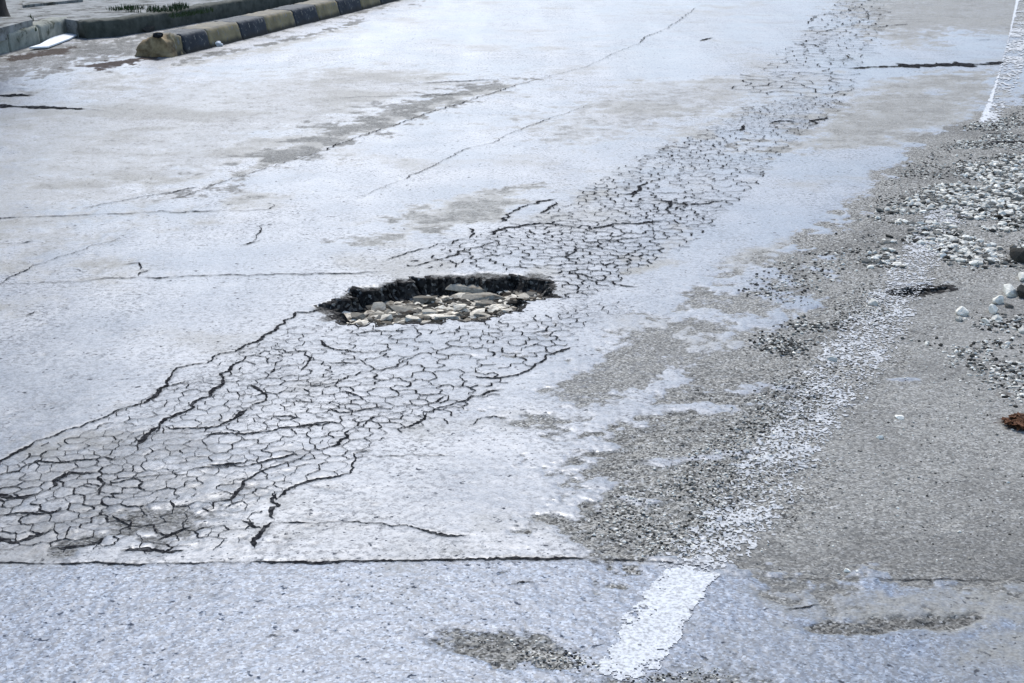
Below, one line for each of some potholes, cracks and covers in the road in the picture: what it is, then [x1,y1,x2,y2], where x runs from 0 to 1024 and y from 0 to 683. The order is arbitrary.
crack [0,301,707,568]
